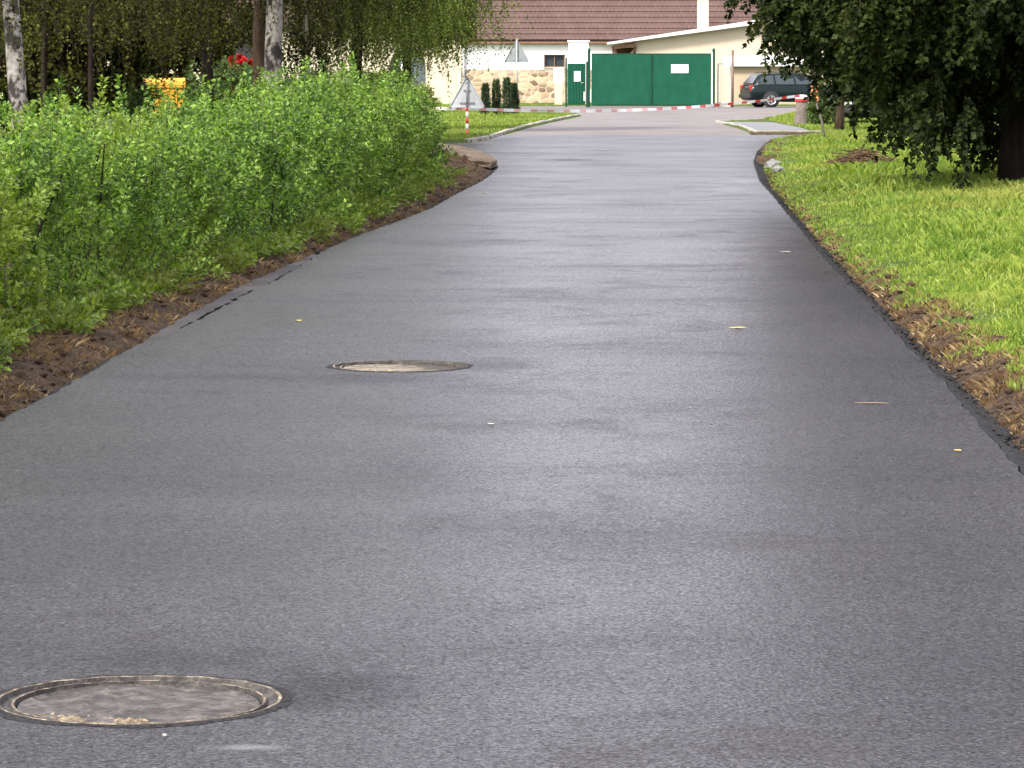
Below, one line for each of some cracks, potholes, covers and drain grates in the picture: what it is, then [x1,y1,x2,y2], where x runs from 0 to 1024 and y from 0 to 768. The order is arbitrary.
manhole cover [0,674,295,728]
manhole cover [325,360,474,372]
crack [180,266,300,329]
